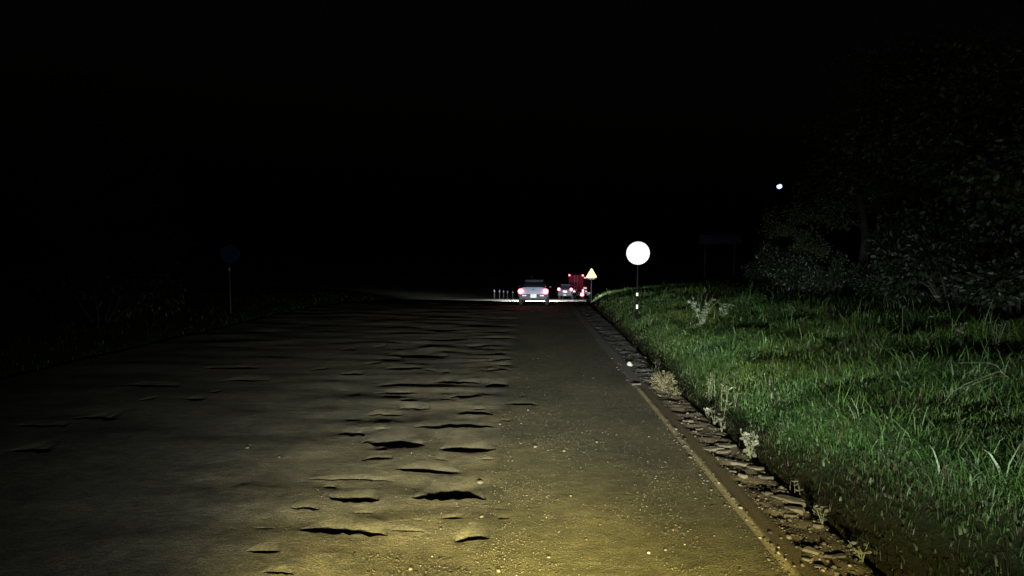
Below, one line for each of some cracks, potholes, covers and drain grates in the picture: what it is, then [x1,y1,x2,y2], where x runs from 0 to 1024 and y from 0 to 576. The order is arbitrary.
pothole [290,500,321,511]
pothole [338,426,366,437]
pothole [439,434,496,453]
pothole [453,522,490,543]
pothole [395,460,461,474]
pothole [4,440,59,453]
pothole [325,488,380,503]
pothole [246,542,282,554]
pothole [361,429,425,447]
pothole [412,475,486,501]
pothole [298,514,388,537]
